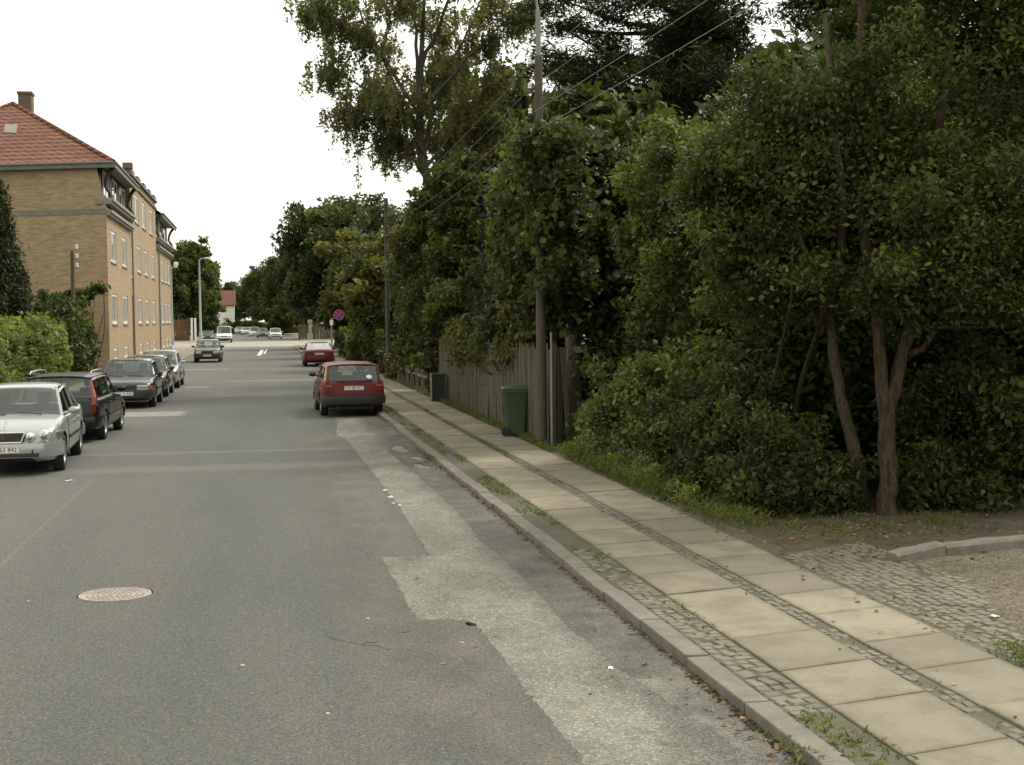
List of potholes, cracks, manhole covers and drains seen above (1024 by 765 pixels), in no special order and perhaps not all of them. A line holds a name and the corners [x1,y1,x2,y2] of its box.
manhole cover [73,586,157,602]
